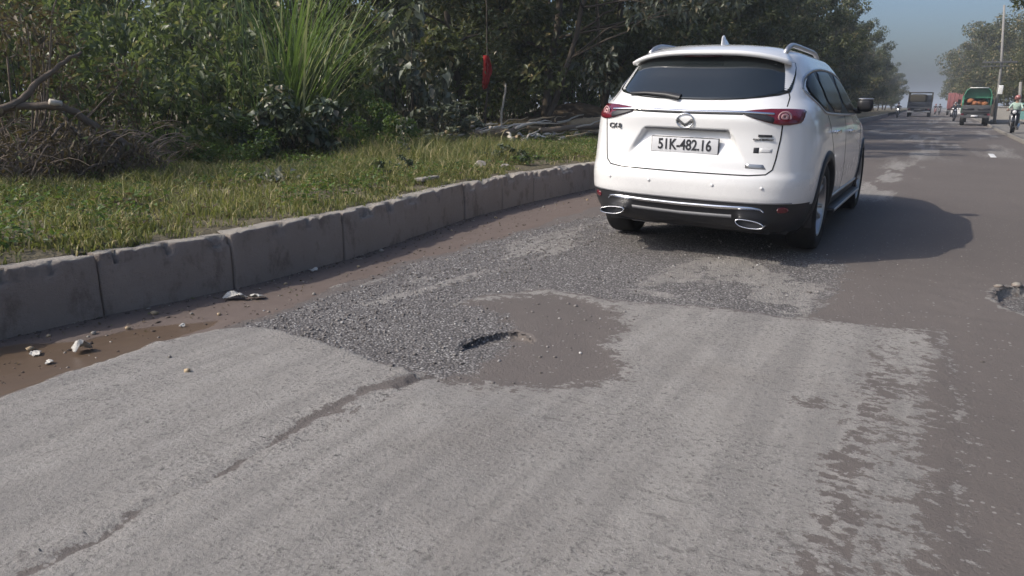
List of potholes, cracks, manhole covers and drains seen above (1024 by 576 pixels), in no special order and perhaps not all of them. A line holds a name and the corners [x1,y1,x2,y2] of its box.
pothole [447,328,544,352]
pothole [983,285,1024,316]
crack [0,366,443,576]
